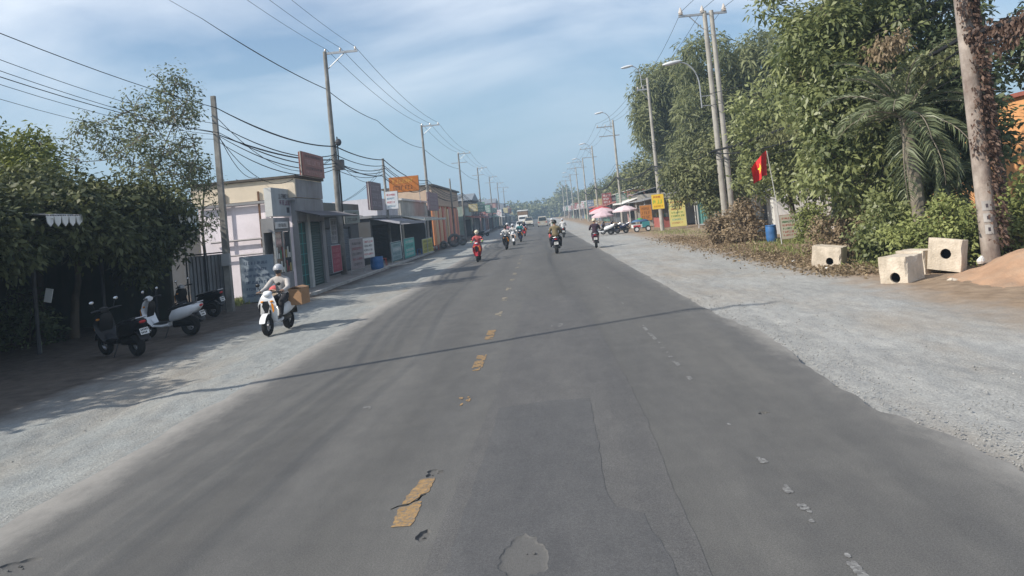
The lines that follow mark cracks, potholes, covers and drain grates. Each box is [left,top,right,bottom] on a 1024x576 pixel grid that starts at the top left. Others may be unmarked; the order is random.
pothole [415,529,431,542]
pothole [426,469,444,478]
